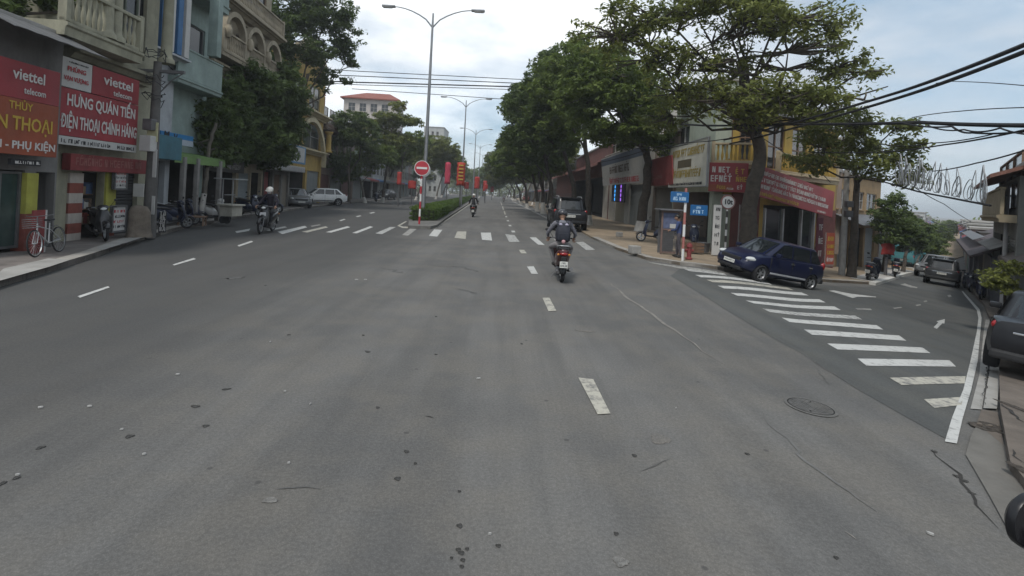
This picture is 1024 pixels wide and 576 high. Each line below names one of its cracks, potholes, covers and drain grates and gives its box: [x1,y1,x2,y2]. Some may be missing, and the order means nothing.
crack [934,453,992,521]
crack [764,416,876,511]
manhole cover [784,397,839,417]
